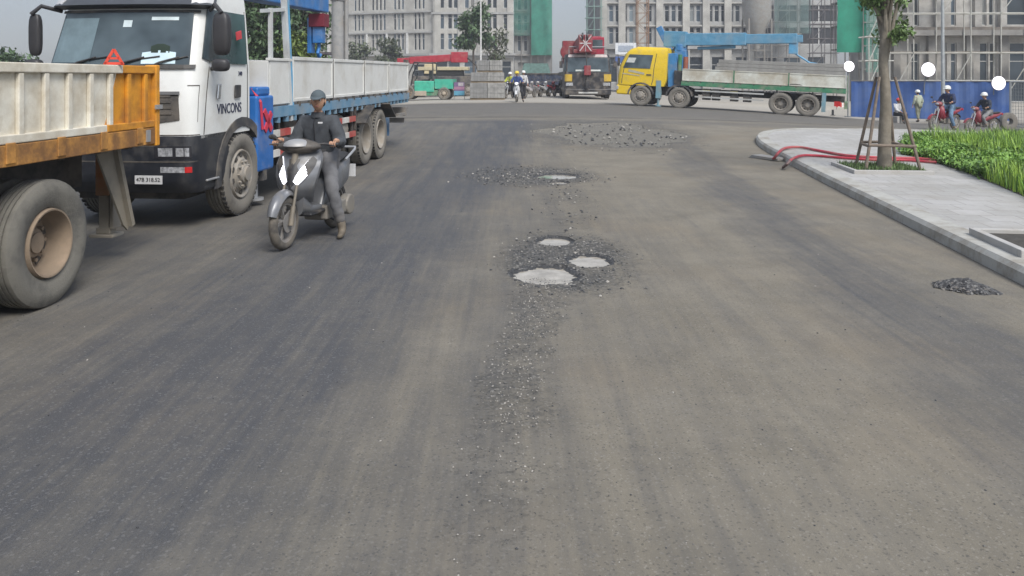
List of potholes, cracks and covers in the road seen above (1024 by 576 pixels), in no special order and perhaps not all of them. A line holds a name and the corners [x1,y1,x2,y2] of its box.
pothole [530,122,691,148]
pothole [563,253,615,267]
pothole [534,235,575,246]
pothole [507,263,585,285]
